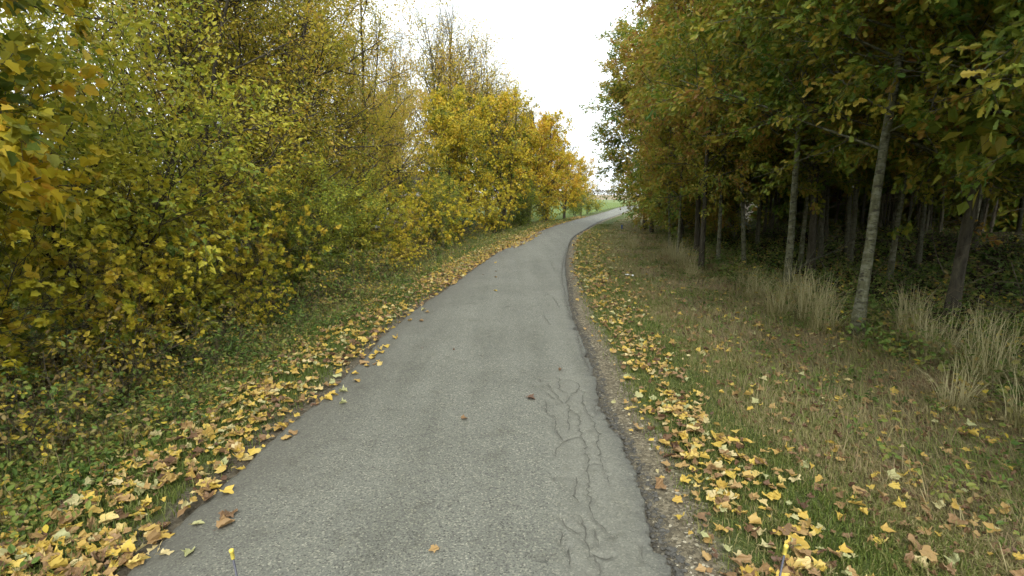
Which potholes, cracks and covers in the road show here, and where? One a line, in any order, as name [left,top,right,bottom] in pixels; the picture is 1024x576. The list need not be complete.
crack [539,250,644,575]
